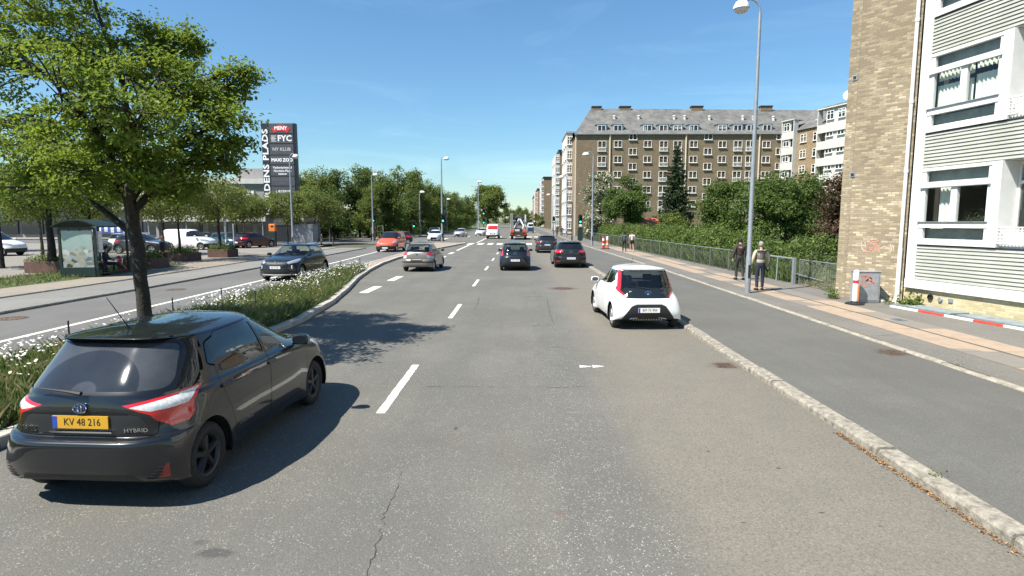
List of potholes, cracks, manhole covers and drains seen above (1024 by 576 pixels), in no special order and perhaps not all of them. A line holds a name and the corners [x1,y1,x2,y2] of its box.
crack [366,470,402,576]
